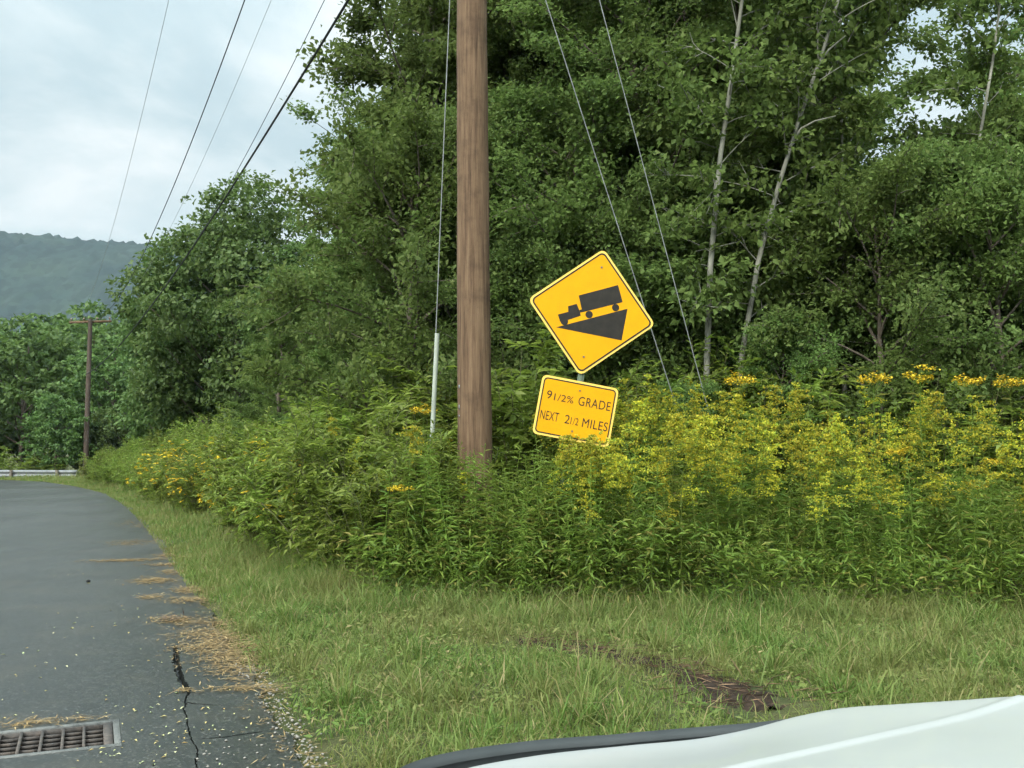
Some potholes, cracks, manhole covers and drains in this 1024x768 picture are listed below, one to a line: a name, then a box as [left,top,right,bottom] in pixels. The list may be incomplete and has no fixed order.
crack [171,646,263,768]
drain grate [0,719,122,759]
